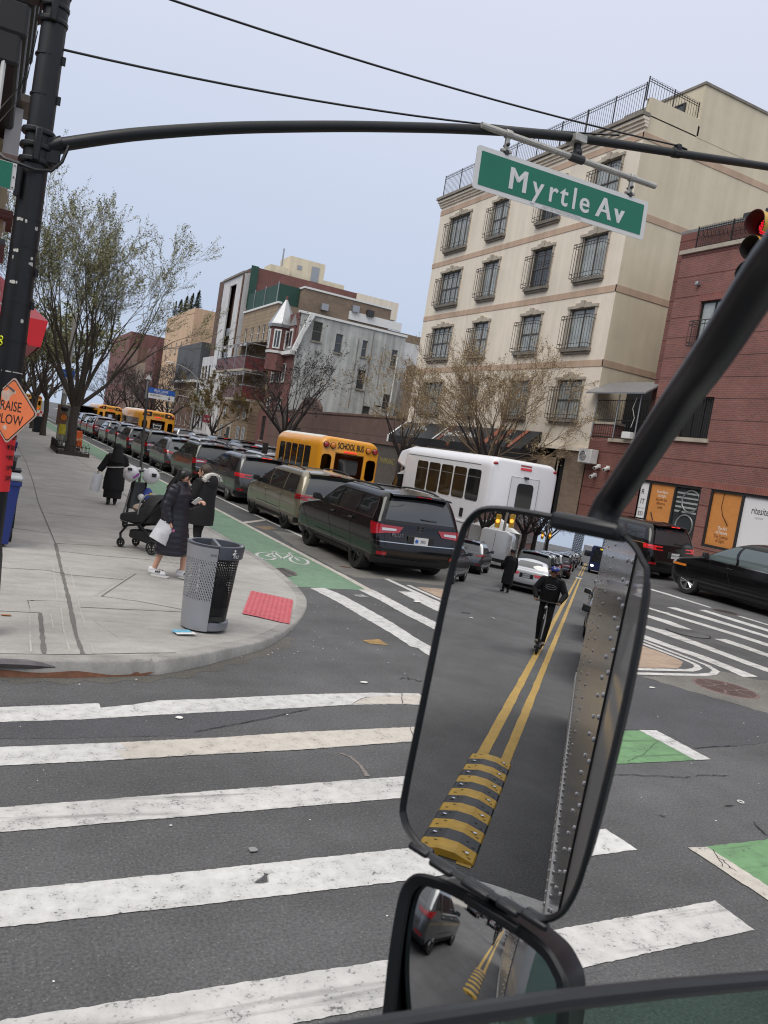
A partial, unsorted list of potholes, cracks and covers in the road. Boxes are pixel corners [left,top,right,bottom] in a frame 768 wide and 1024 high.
crack [618,743,726,778]
manhole cover [691,678,760,699]
